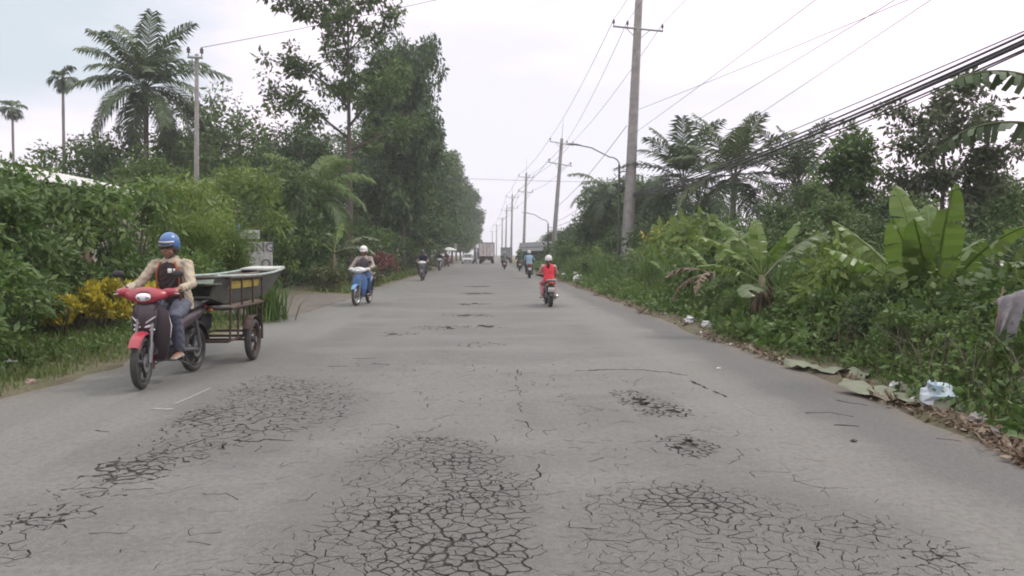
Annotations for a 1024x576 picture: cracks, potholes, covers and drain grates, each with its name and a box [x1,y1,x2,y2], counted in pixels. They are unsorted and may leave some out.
crack [0,352,1014,576]
pothole [609,390,691,417]
pothole [655,434,722,459]
